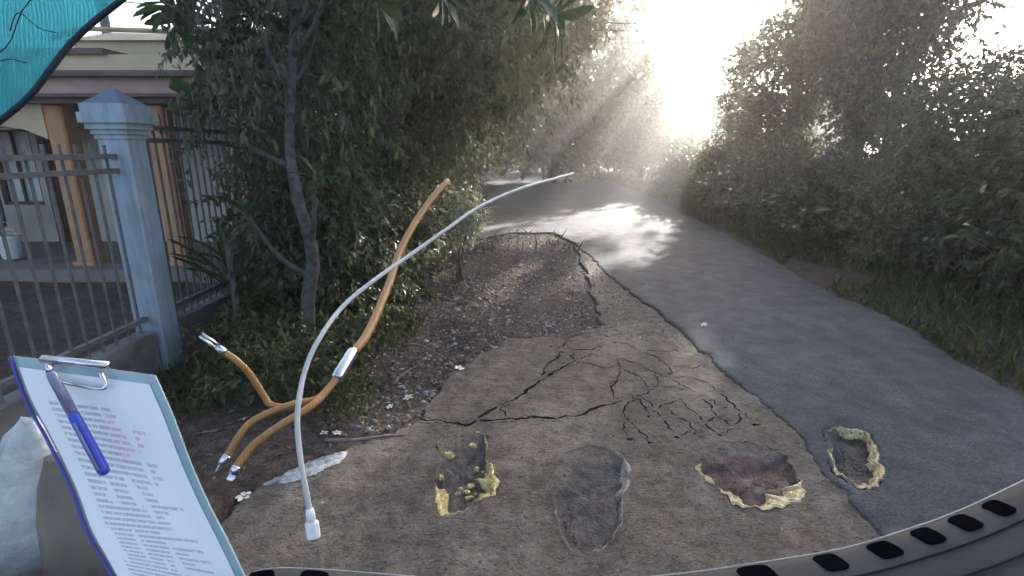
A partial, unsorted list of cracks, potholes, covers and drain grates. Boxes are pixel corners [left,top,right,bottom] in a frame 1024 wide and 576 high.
pothole [545,443,633,559]
pothole [822,424,888,490]
pothole [692,438,808,512]
pothole [429,426,500,518]
crack [417,333,760,444]
